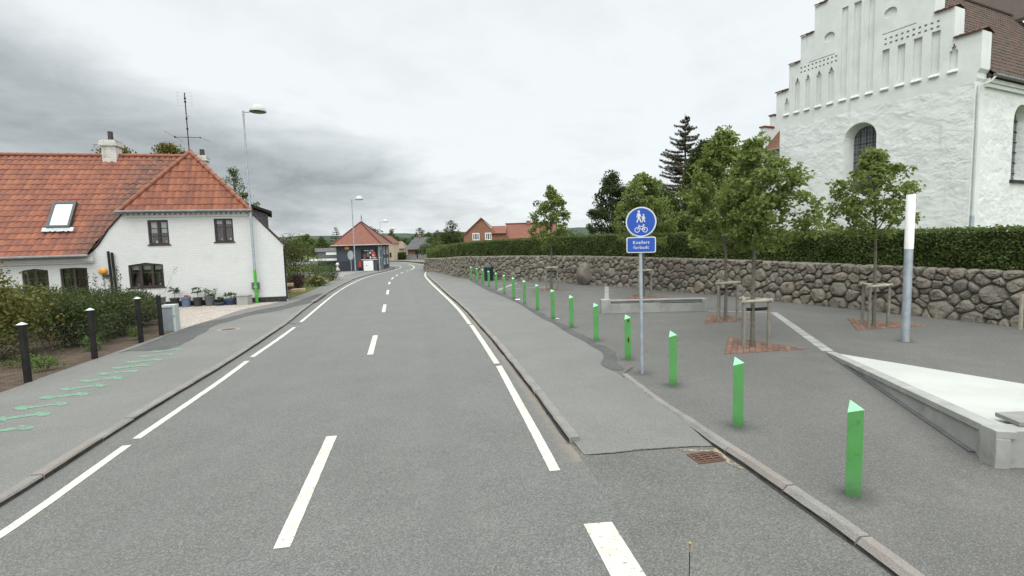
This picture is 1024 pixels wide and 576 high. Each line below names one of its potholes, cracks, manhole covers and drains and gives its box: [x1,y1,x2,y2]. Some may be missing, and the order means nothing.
drain grate [686,451,726,464]
